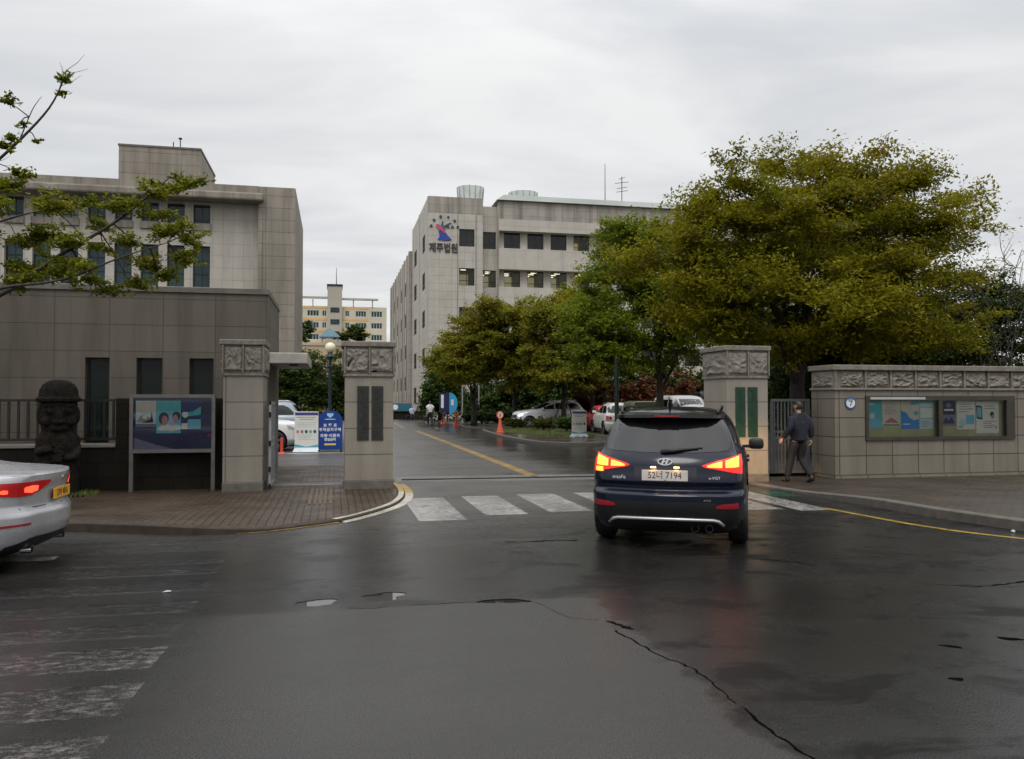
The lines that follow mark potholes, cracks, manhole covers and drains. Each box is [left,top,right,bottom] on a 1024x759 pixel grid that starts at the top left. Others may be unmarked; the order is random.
crack [535,602,815,759]
pothole [362,592,406,601]
